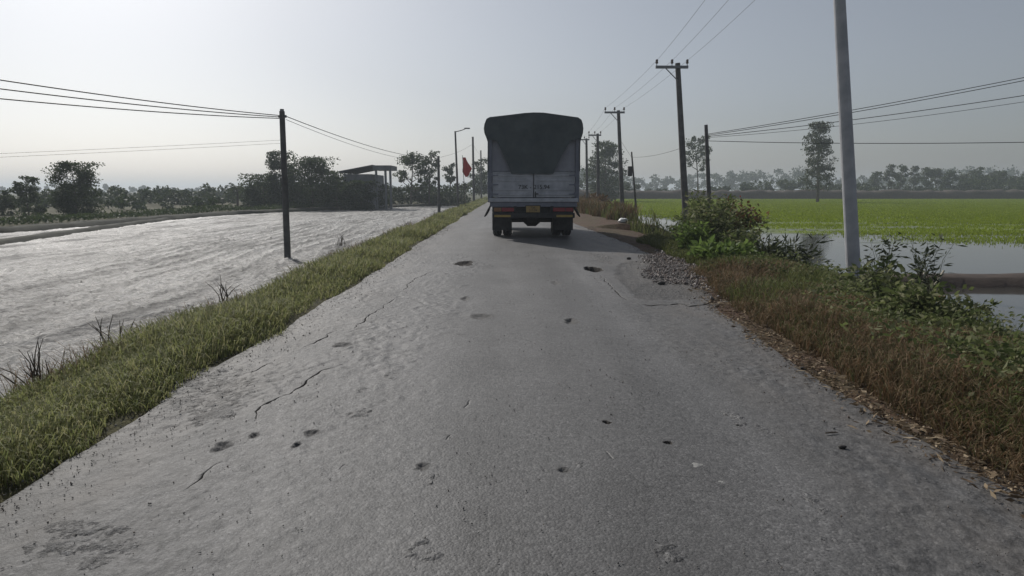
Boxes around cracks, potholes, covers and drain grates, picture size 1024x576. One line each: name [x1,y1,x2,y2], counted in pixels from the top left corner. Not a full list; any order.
pothole [292,426,329,441]
pothole [199,437,244,458]
crack [169,459,234,493]
crack [237,270,440,423]
crack [593,275,728,309]
